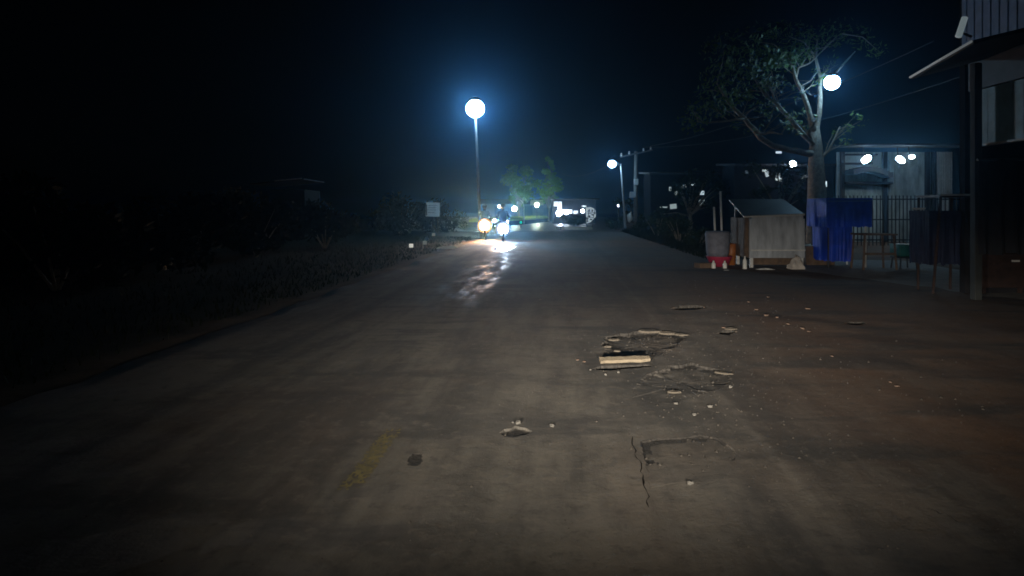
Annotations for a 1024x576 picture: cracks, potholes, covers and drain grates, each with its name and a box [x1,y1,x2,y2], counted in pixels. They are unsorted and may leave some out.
pothole [601,330,687,357]
crack [629,433,650,507]
pothole [632,362,732,405]
pothole [499,426,532,438]
pothole [640,434,737,489]
